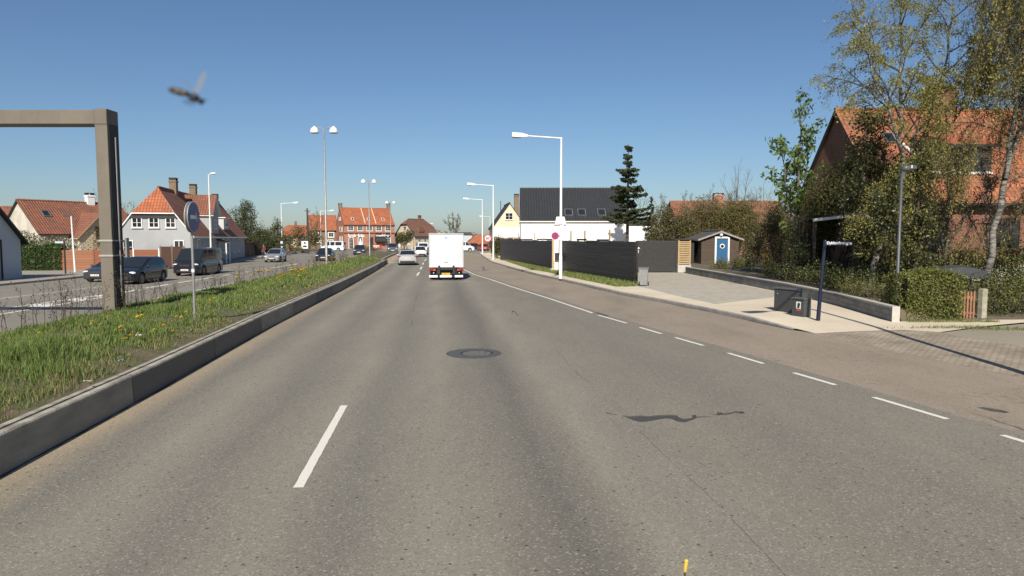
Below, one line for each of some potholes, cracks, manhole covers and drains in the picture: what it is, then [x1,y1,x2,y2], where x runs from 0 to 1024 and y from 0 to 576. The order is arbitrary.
manhole cover [446,348,501,359]
